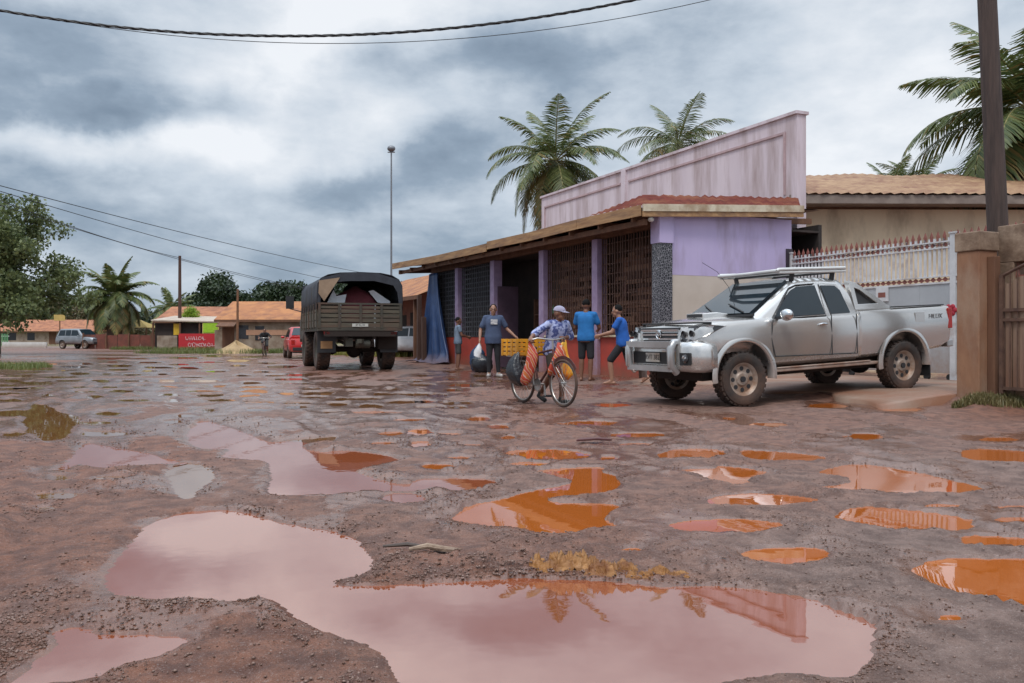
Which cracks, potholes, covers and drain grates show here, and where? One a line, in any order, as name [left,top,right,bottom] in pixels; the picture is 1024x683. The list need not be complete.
pothole [708,493,818,505]
pothole [911,558,1024,605]
pothole [506,449,590,460]
pothole [819,465,982,493]
pothole [12,627,188,683]
pothole [835,506,975,531]
pothole [58,443,187,470]
pothole [165,463,217,499]
pothole [187,421,497,495]
pothole [15,403,82,441]
pothole [452,467,621,533]
pothole [961,449,1024,462]
